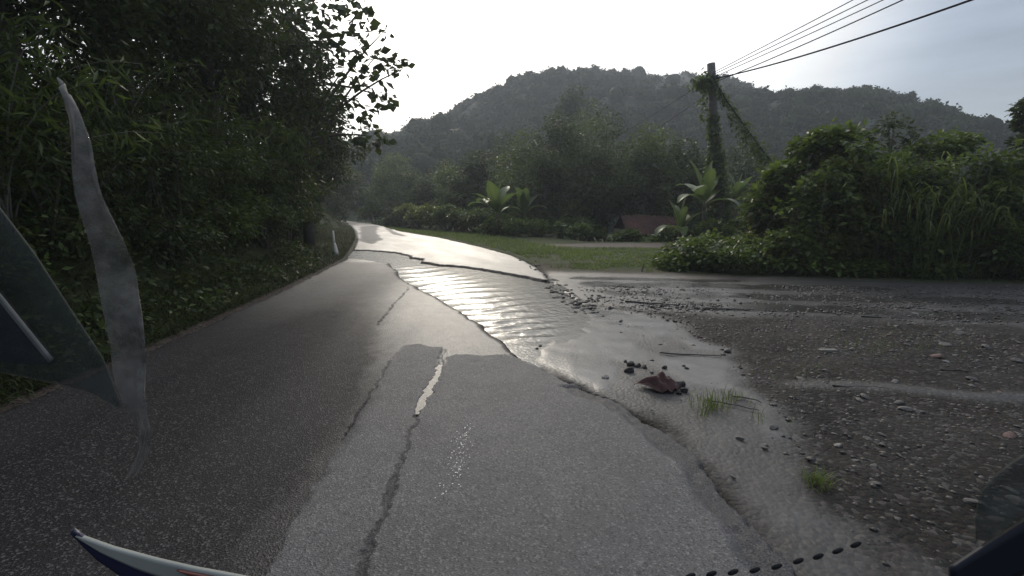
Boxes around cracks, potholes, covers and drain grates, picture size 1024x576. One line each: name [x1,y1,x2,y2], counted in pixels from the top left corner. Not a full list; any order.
crack [376,287,410,325]
crack [340,348,447,576]
